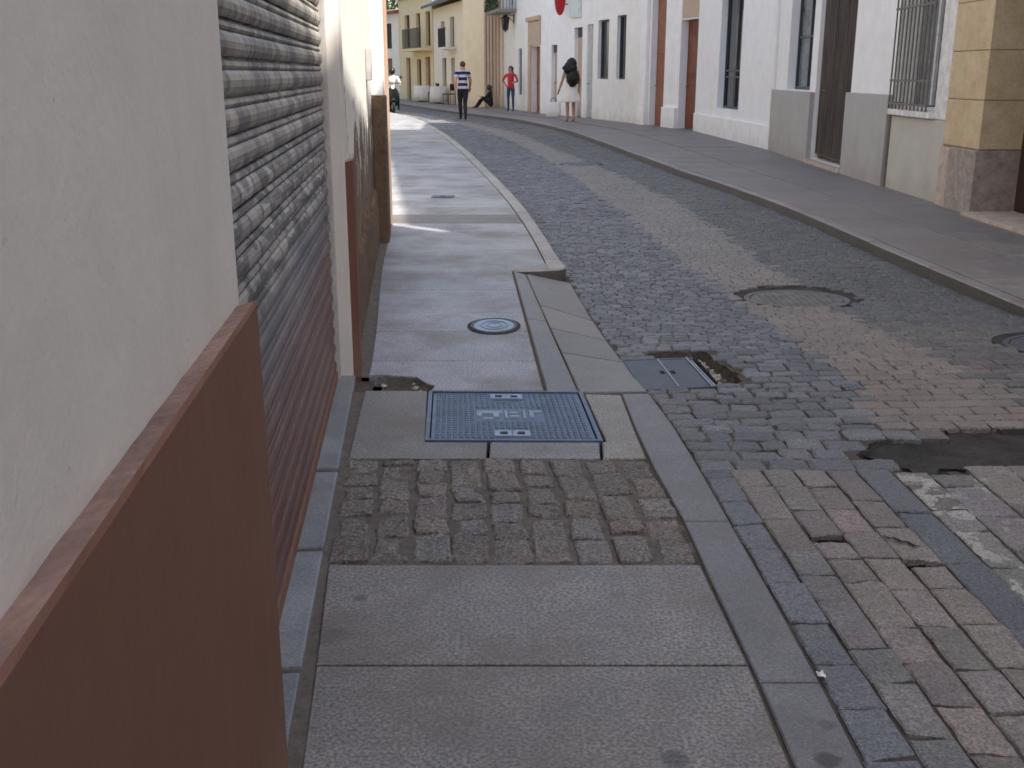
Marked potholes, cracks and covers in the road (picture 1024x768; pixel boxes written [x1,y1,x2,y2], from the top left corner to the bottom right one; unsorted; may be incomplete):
pothole [653,351,735,385]
manhole cover [736,287,859,309]
manhole cover [991,332,1024,353]
crack [883,535,918,546]
manhole cover [620,357,718,391]
manhole cover [467,318,521,335]
manhole cover [425,390,603,454]
pothole [378,377,433,393]
